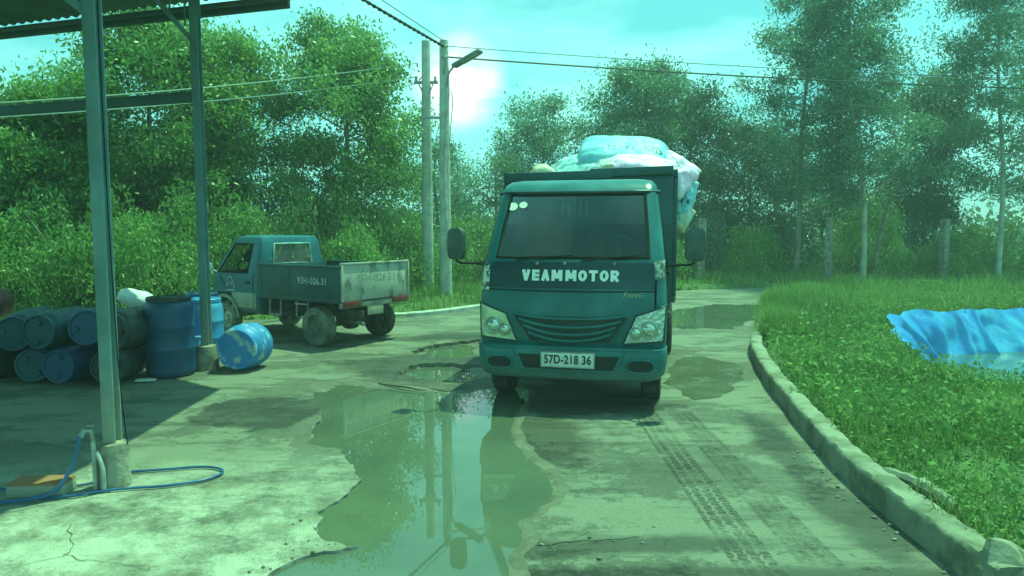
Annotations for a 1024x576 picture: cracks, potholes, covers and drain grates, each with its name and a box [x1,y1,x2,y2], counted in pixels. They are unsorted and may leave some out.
pothole [411,339,481,359]
crack [2,525,150,573]
pothole [397,362,492,382]
crack [538,528,639,545]
